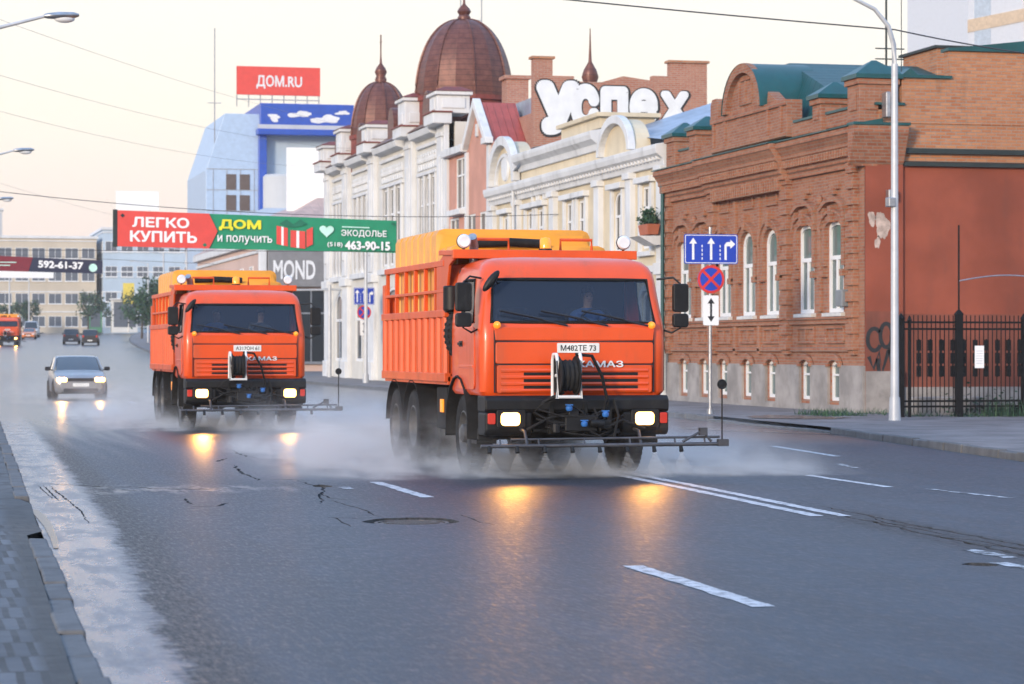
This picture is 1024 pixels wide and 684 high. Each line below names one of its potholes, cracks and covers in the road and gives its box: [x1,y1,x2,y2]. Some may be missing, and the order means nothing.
crack [39,485,89,523]
crack [216,451,381,527]
